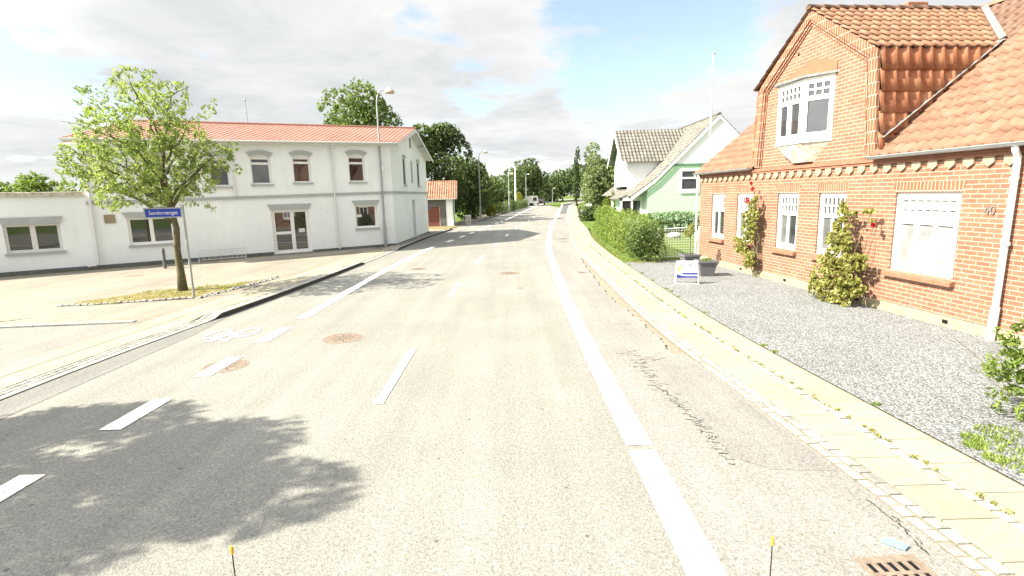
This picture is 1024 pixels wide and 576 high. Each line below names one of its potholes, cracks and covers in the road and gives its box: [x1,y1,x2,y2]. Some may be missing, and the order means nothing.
manhole cover [200,359,249,373]
drain grate [853,554,939,576]
crack [866,498,929,554]
manhole cover [322,333,363,343]
crack [619,350,748,464]
